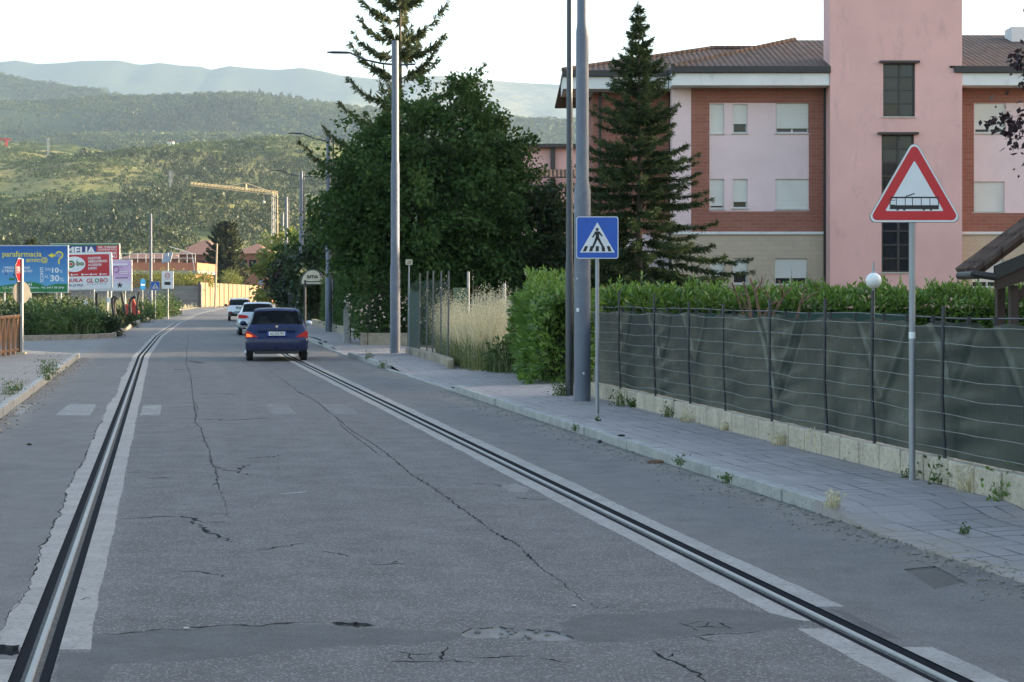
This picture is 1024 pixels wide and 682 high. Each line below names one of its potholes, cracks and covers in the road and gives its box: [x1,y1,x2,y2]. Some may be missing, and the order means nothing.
crack [378,644,511,663]
crack [267,369,668,613]
crack [126,341,279,543]
pothole [461,626,574,641]
crack [98,622,322,635]
crack [652,621,754,682]
